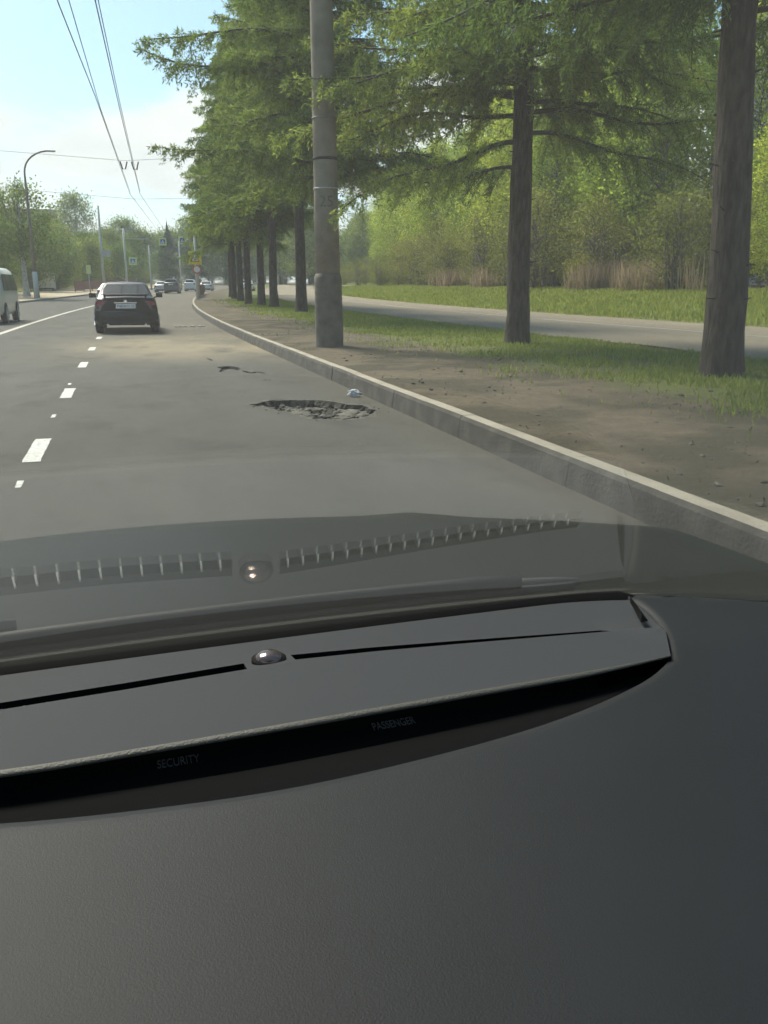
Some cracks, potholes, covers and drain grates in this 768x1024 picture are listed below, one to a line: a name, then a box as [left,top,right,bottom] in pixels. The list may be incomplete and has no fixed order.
pothole [243,399,389,421]
